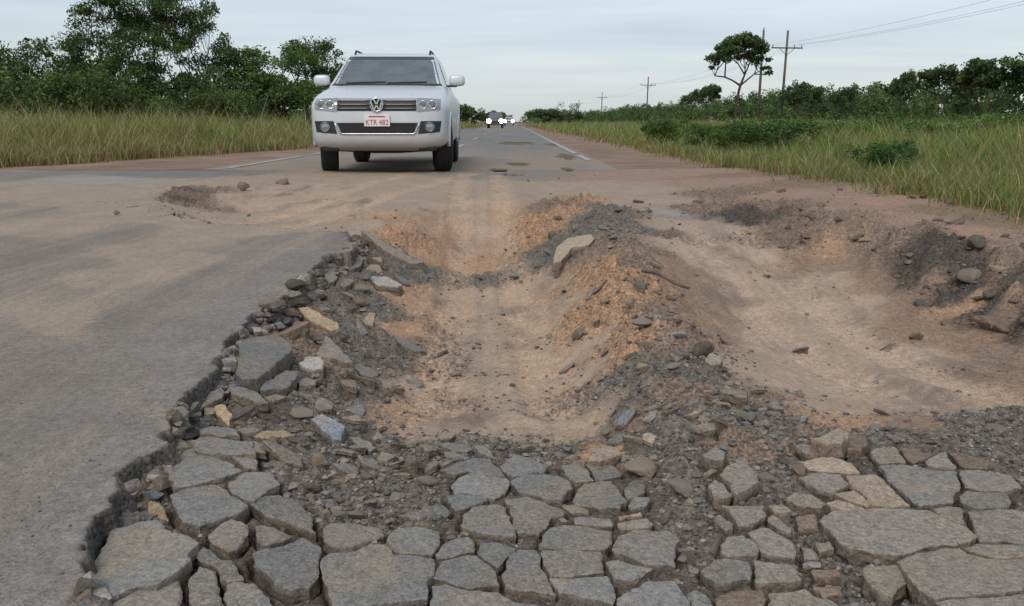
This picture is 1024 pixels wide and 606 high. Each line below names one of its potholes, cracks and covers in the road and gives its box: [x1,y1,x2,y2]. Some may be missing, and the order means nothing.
crack [64,378,327,606]
pothole [661,187,1024,461]
pothole [204,196,736,565]
crack [377,429,1024,606]
